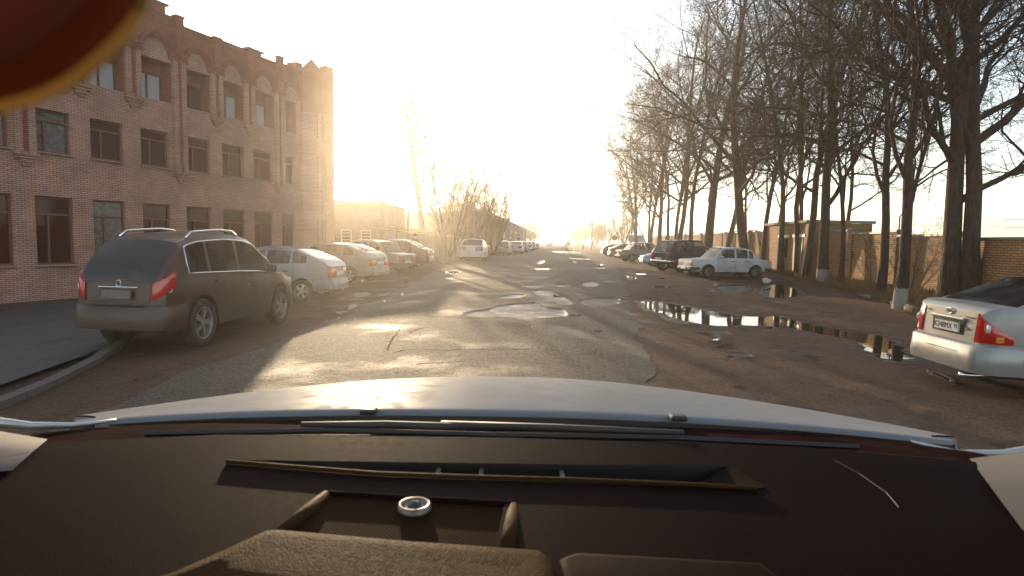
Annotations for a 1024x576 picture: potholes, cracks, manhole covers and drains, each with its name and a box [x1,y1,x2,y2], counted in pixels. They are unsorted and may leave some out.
pothole [529,289,573,305]
pothole [463,302,568,318]
pothole [578,297,622,306]
crack [386,316,528,366]
